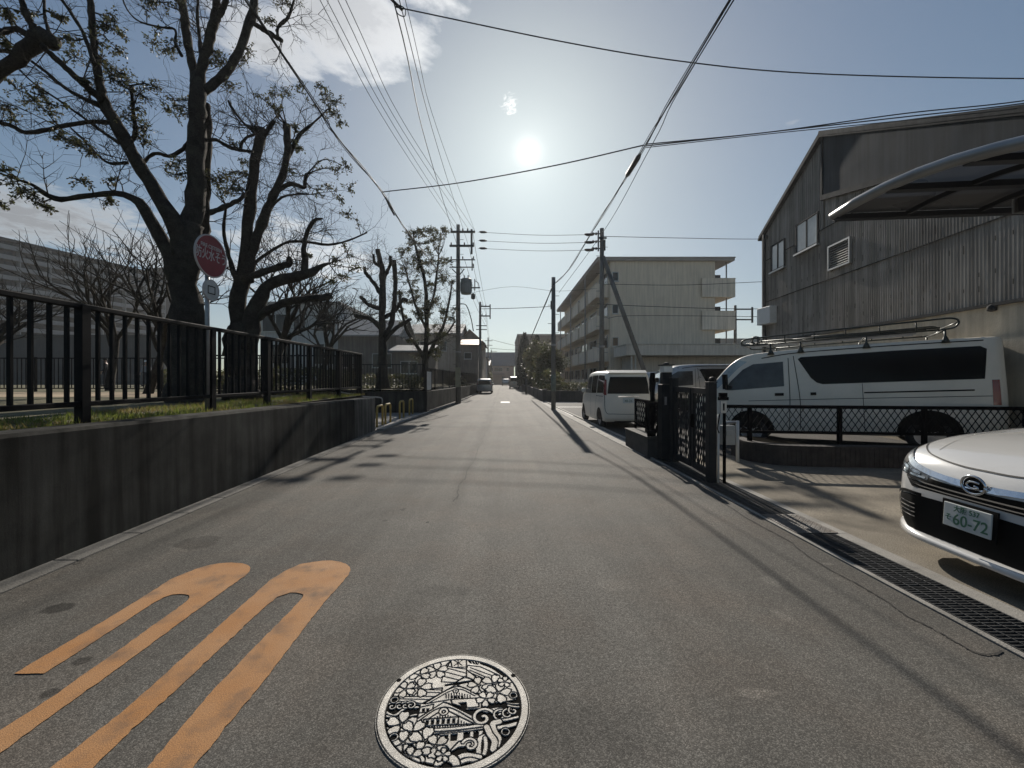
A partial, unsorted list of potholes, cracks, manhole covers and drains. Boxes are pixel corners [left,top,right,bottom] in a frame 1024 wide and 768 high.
drain grate [896,585,1024,653]
manhole cover [375,655,530,768]
crack [724,503,1003,655]
